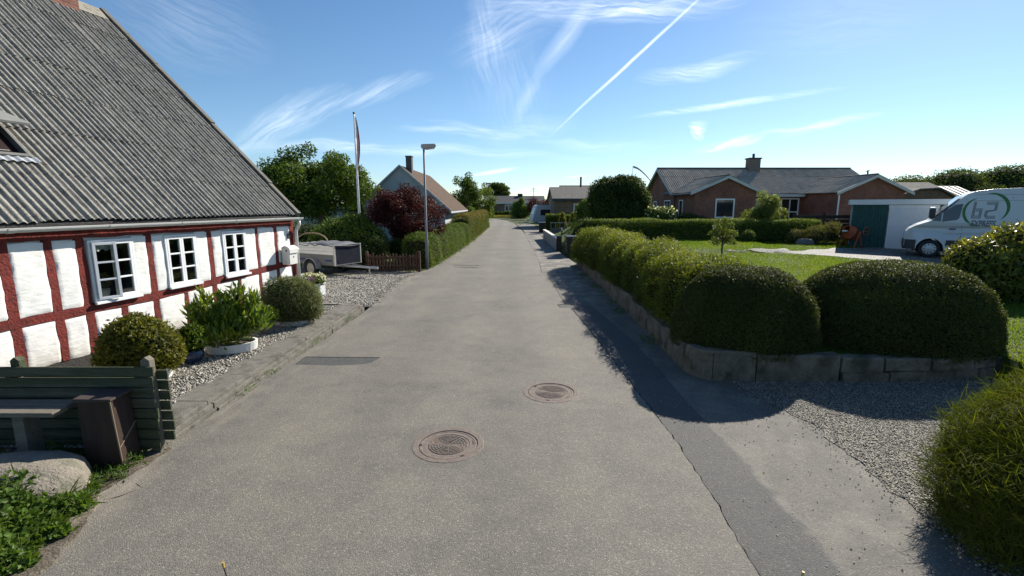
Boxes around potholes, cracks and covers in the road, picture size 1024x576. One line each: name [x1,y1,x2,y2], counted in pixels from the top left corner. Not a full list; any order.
manhole cover [523,382,579,403]
manhole cover [412,428,484,463]
